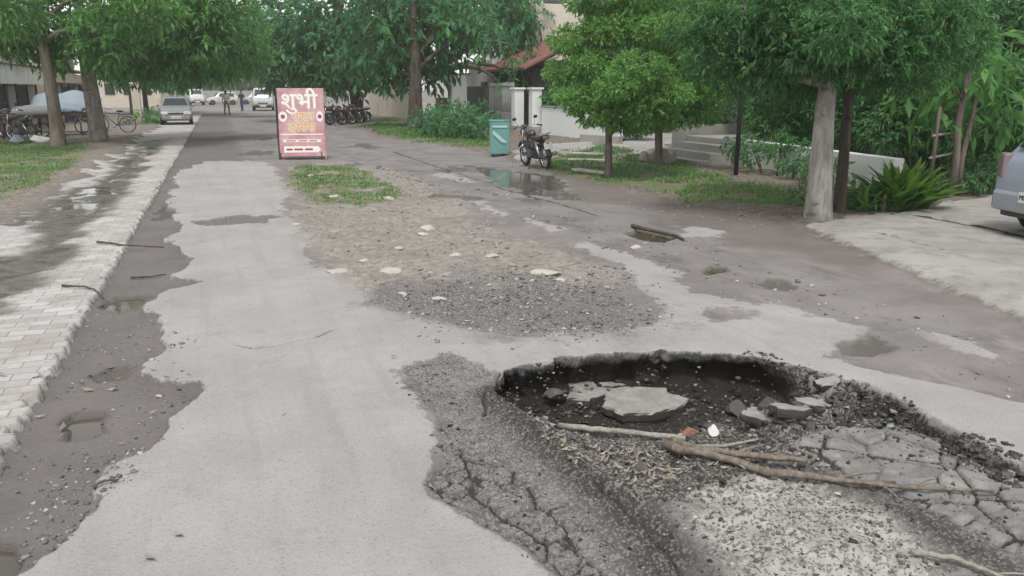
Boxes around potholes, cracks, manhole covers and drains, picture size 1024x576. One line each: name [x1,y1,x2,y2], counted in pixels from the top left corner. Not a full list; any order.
crack [429,433,682,576]
crack [236,328,335,349]
crack [793,426,1024,549]
pothole [624,229,677,243]
pothole [491,349,858,502]
pothole [60,409,110,442]
